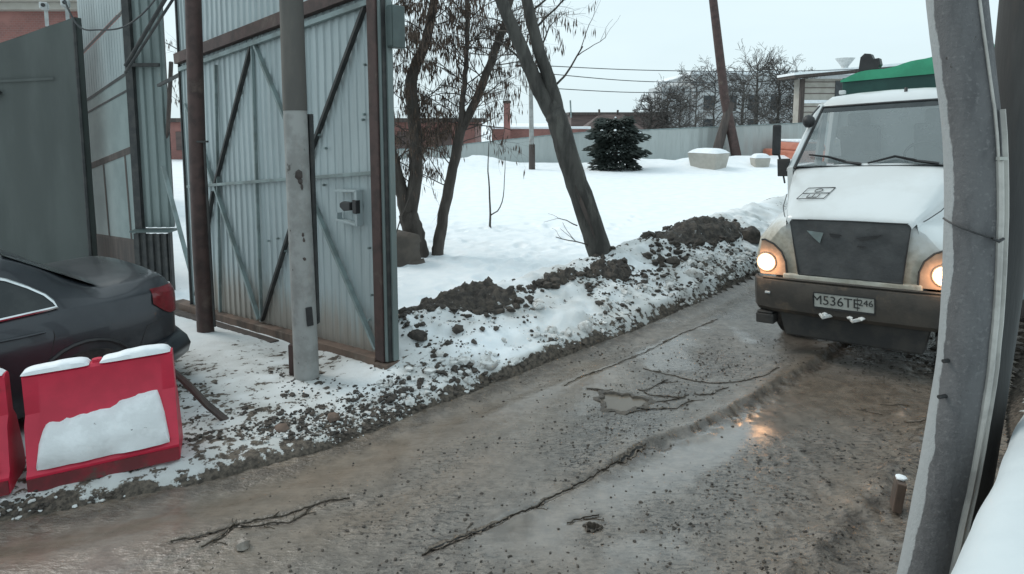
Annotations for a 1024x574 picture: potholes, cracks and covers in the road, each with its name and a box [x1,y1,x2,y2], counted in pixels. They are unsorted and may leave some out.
crack [422,443,646,556]
pothole [584,521,604,533]
pothole [593,390,657,415]
crack [564,319,780,413]
crack [170,497,350,547]
